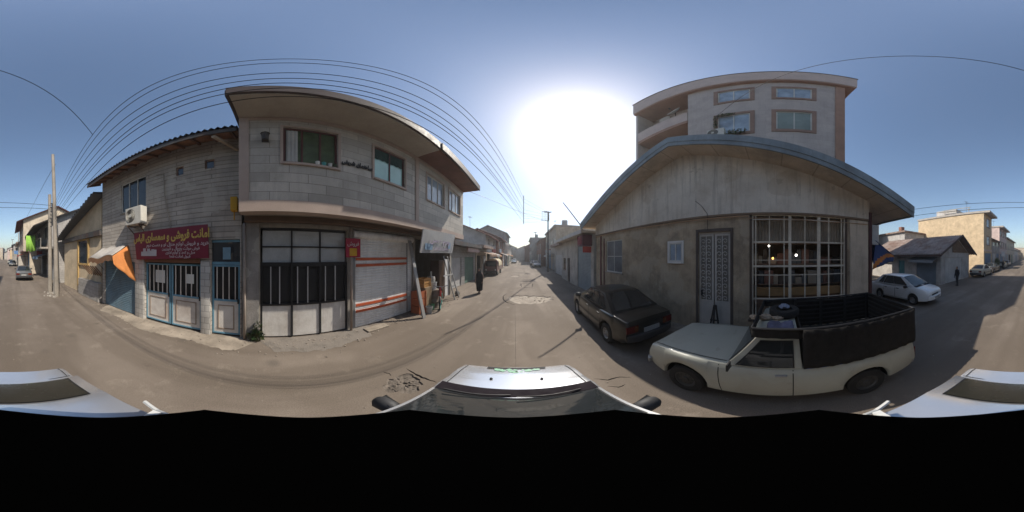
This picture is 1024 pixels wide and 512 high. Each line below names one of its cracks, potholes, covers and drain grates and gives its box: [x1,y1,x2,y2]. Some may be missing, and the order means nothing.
pothole [383,373,423,394]
